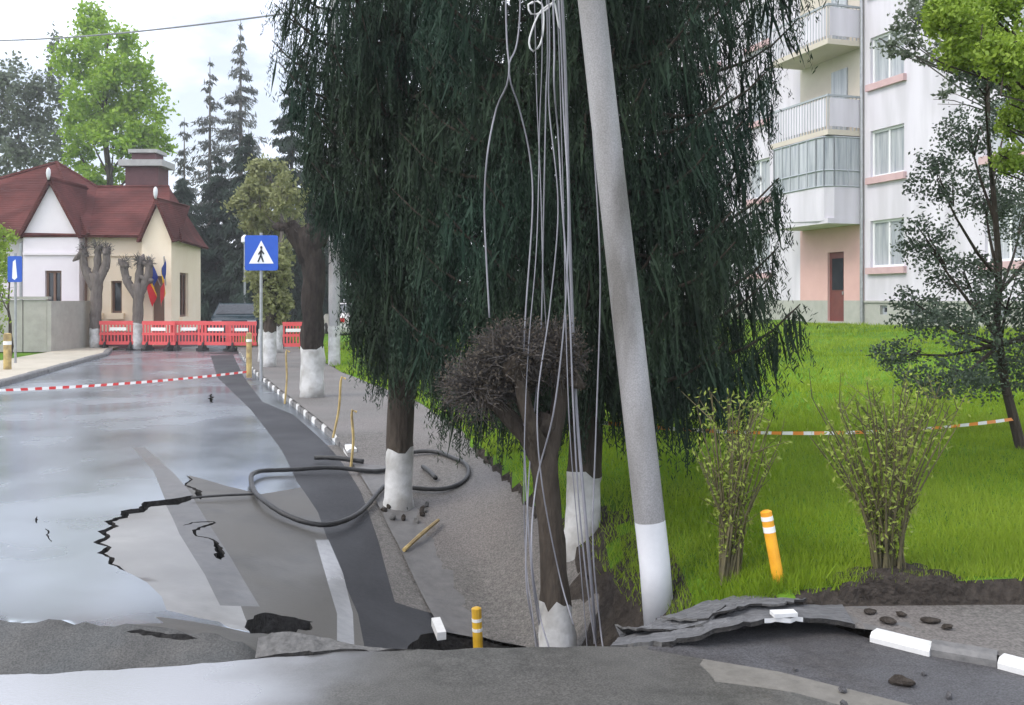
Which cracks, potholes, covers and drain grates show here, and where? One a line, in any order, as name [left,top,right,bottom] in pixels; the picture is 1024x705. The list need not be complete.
pothole [245,612,313,634]
pothole [407,633,518,650]
crack [94,476,225,571]
